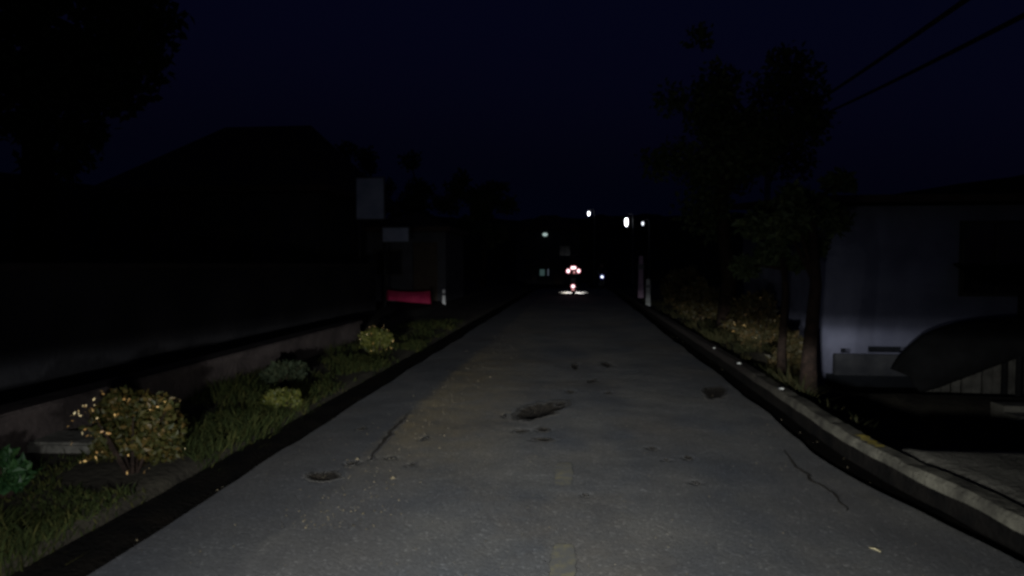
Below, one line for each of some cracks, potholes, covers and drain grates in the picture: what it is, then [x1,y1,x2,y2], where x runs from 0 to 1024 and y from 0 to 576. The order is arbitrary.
pothole [302,470,346,483]
pothole [506,398,576,423]
pothole [698,385,729,402]
crack [783,450,849,511]
